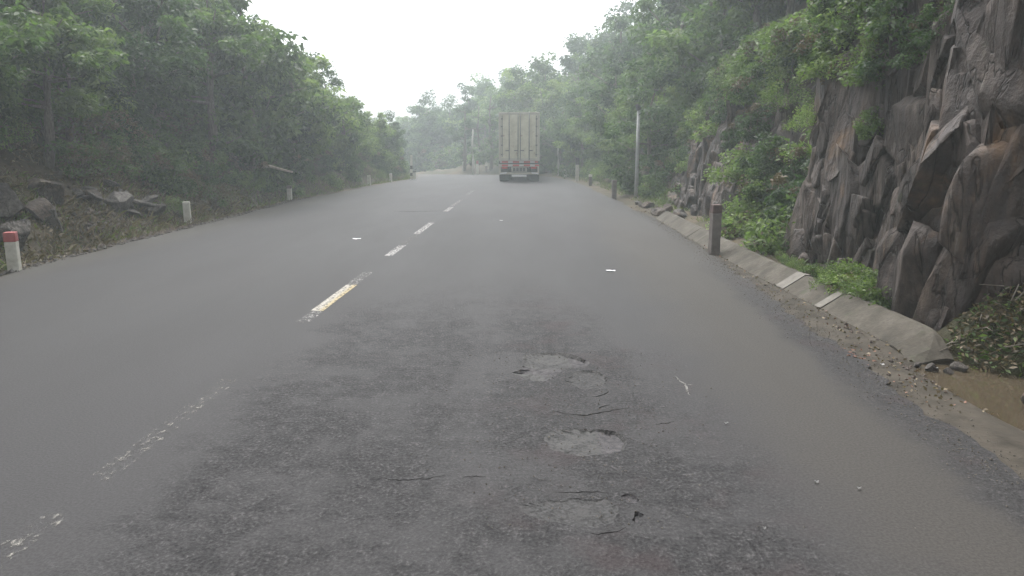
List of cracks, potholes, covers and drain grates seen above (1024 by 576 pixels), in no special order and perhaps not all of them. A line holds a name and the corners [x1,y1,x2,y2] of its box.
pothole [544,428,627,456]
crack [554,391,627,416]
pothole [512,352,590,381]
pothole [565,370,608,389]
pothole [621,493,640,503]
pothole [518,498,620,528]
